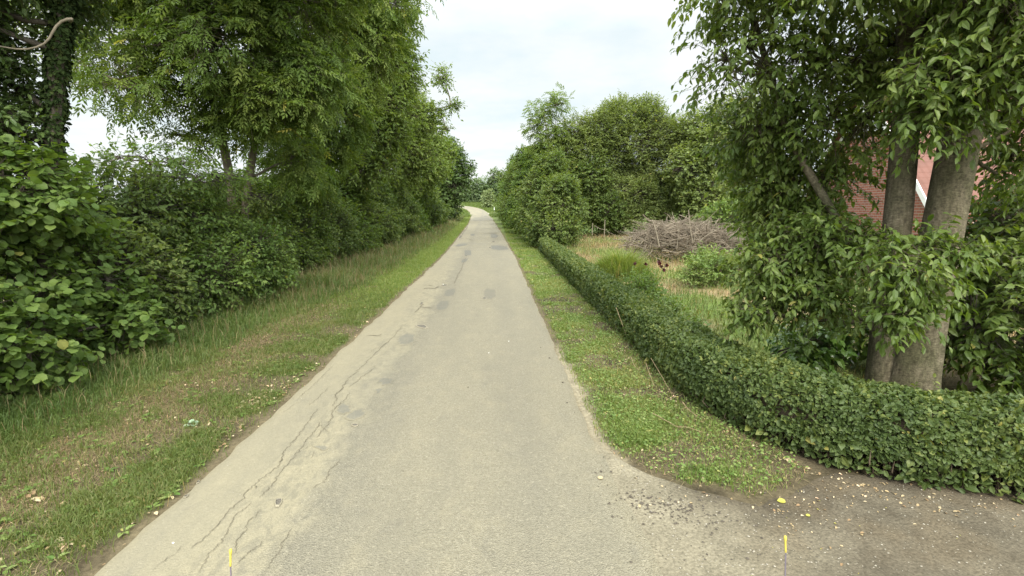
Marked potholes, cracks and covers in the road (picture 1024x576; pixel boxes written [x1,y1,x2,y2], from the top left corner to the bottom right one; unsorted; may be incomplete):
crack [162,285,438,570]
